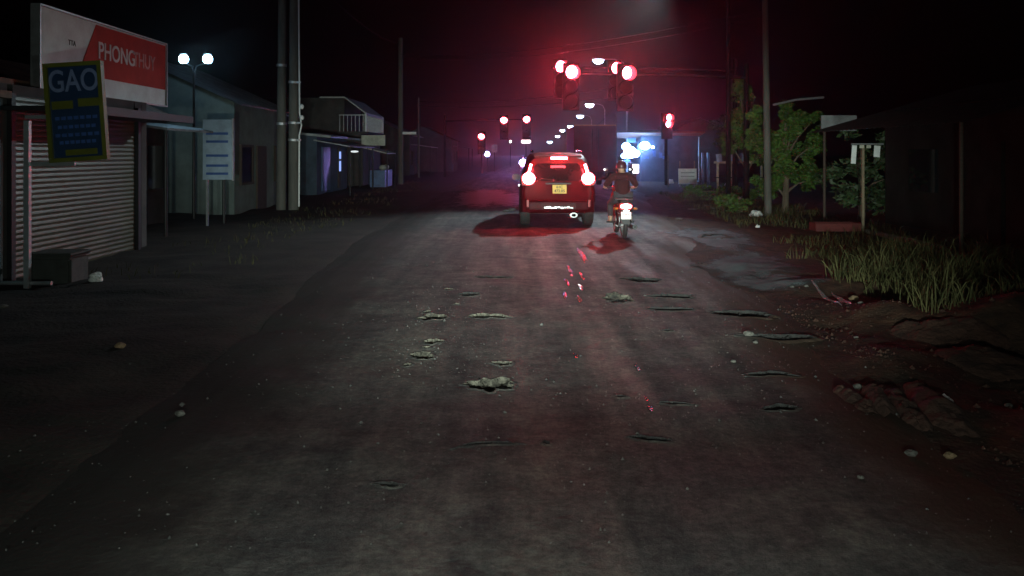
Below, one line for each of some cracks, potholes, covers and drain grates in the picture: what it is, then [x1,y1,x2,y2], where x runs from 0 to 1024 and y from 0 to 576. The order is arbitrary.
pothole [458,376,519,394]
pothole [413,313,451,321]
pothole [599,292,636,304]
pothole [407,351,437,361]
